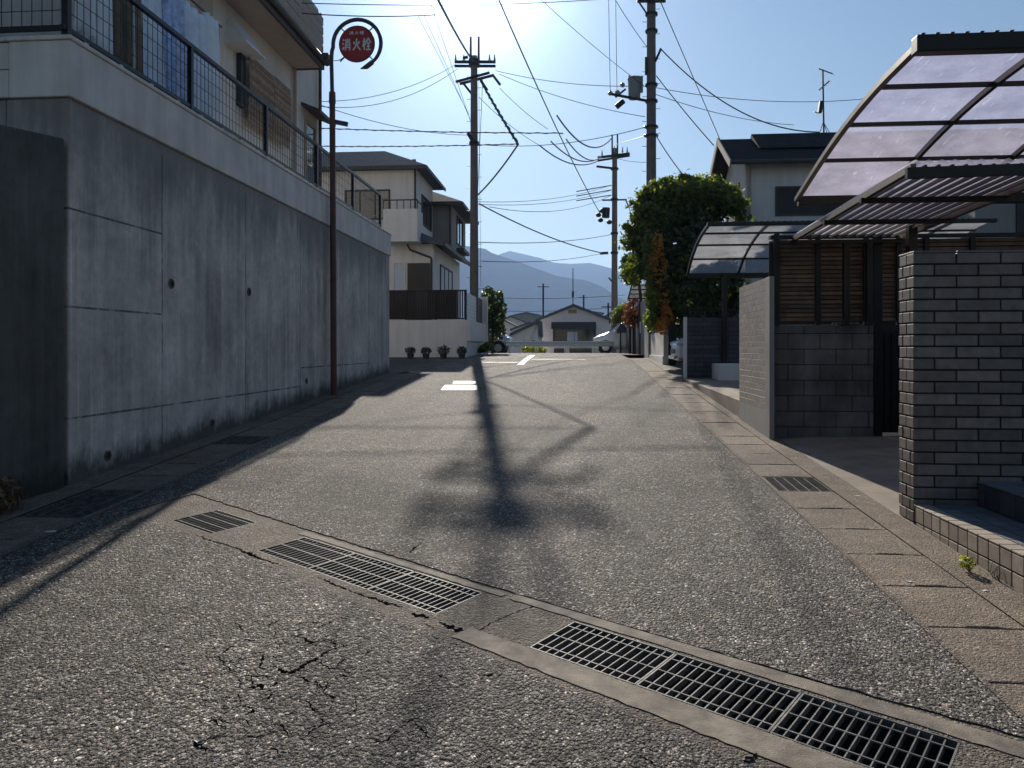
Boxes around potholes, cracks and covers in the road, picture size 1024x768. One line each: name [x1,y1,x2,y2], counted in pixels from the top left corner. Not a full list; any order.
crack [195,534,534,632]
drain grate [20,490,143,522]
drain grate [529,622,961,768]
drain grate [257,537,482,614]
drain grate [171,510,256,534]
drain grate [763,477,833,492]
crack [157,619,390,758]
drain grate [213,436,271,446]
